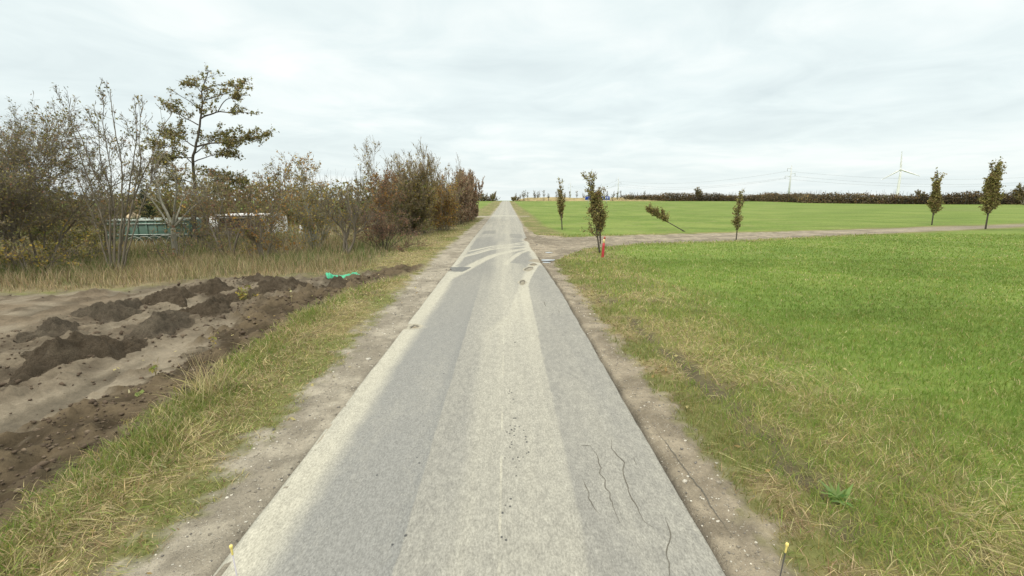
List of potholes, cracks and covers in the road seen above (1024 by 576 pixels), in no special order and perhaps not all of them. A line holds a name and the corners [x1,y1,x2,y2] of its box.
crack [582,434,732,575]
